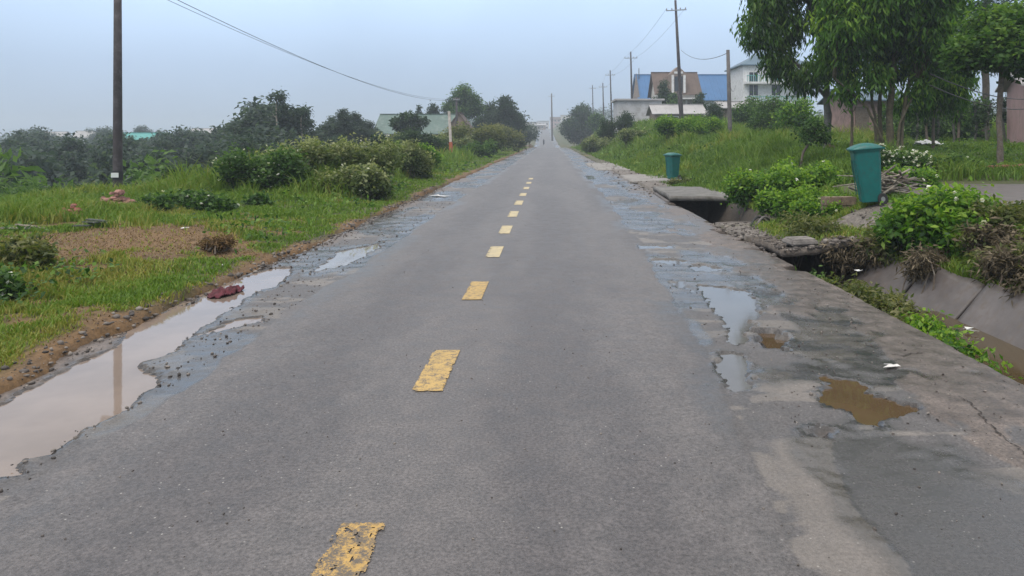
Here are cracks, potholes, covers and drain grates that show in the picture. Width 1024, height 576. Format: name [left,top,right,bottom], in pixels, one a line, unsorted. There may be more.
crack [959,396,1024,454]
pothole [750,326,797,351]
pothole [711,349,760,395]
pothole [0,266,297,480]
pothole [813,373,929,431]
pothole [690,284,766,345]
pothole [310,243,383,273]
